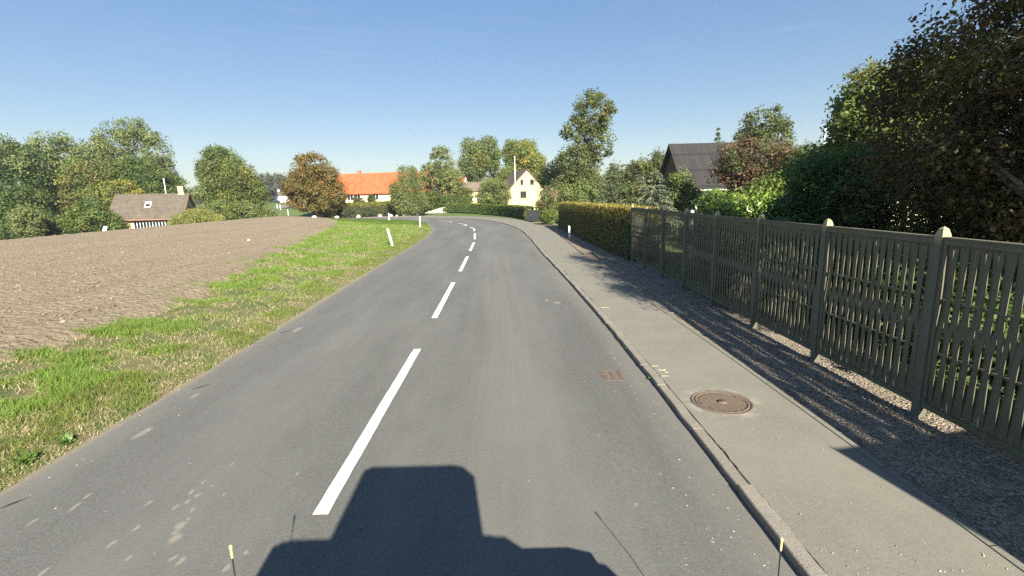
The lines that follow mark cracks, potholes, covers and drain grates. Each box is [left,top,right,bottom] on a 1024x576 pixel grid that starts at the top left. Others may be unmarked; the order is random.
manhole cover [691,390,754,415]
manhole cover [599,370,625,381]
